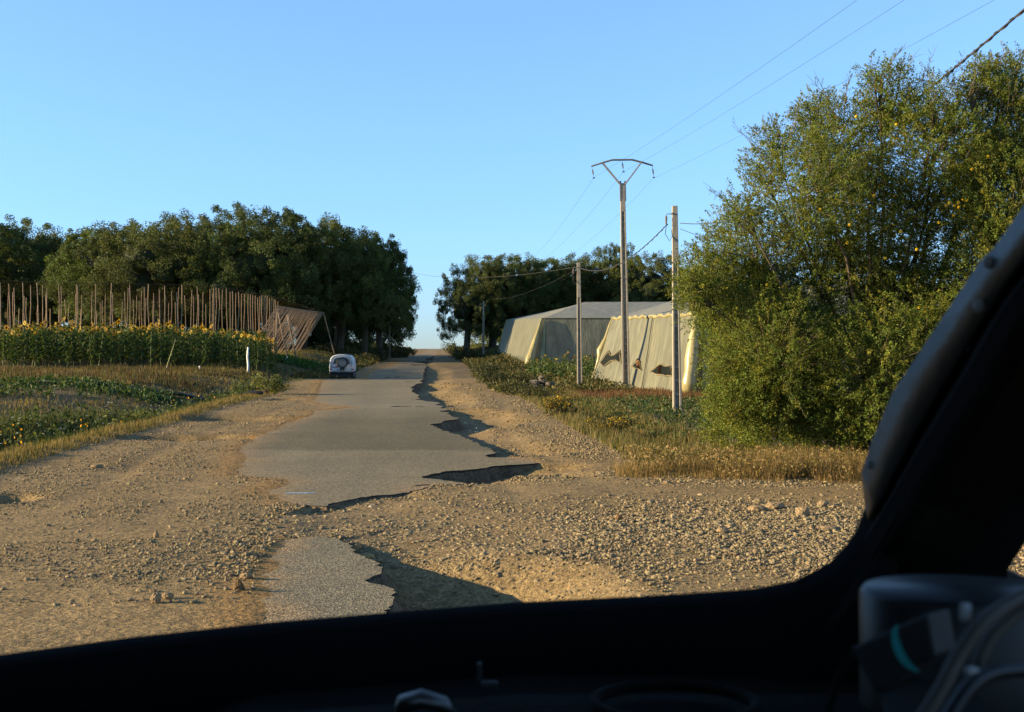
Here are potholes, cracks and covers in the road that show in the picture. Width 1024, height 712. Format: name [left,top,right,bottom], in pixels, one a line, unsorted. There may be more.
pothole [478,474,528,485]
pothole [450,429,499,449]
